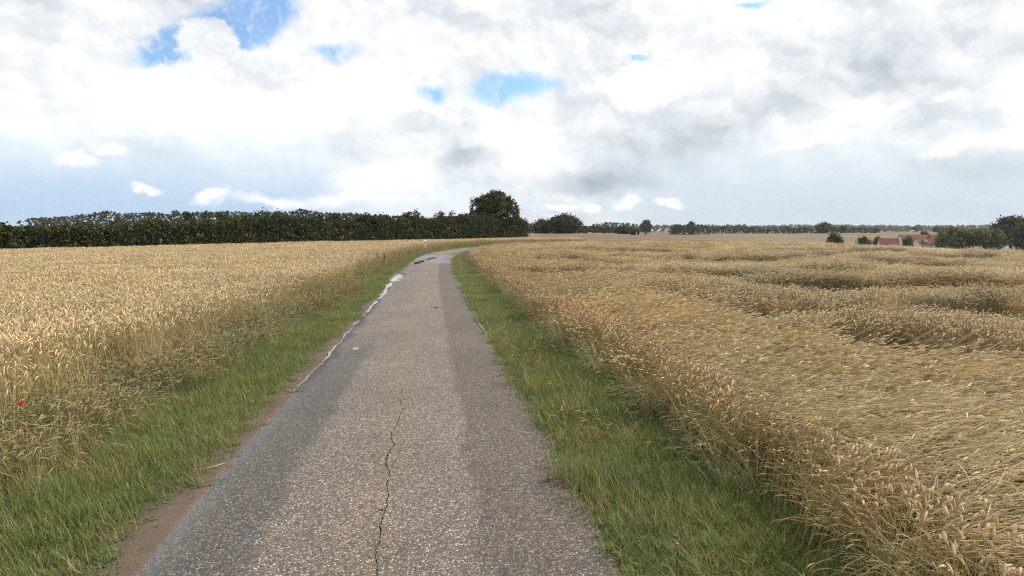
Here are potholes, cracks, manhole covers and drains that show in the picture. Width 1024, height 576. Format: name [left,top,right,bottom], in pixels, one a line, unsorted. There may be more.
crack [375,389,404,576]
